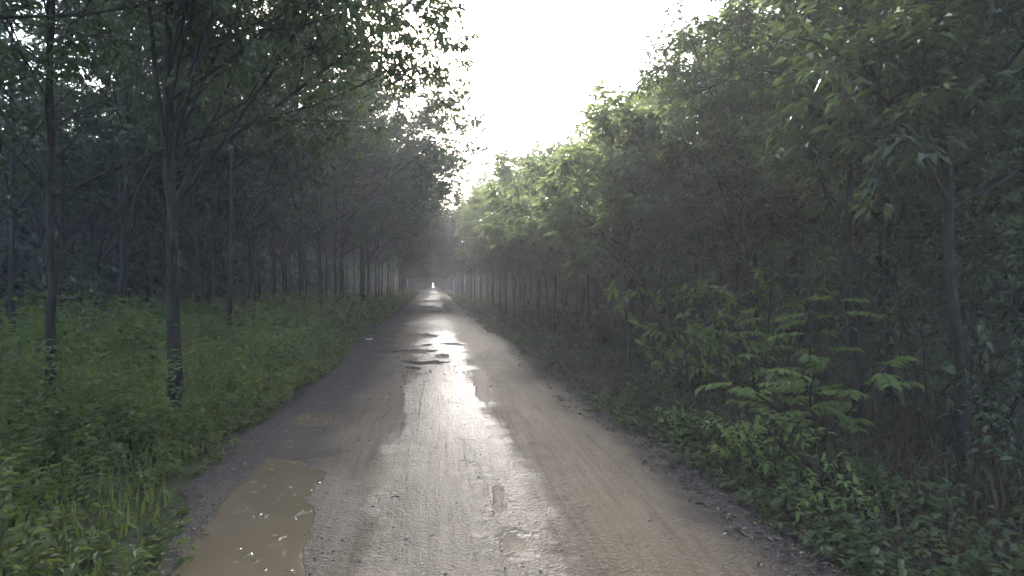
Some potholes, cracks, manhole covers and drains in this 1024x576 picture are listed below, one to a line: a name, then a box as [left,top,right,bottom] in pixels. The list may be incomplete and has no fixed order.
pothole [492,485,505,514]
pothole [168,457,327,576]
pothole [502,532,527,554]
